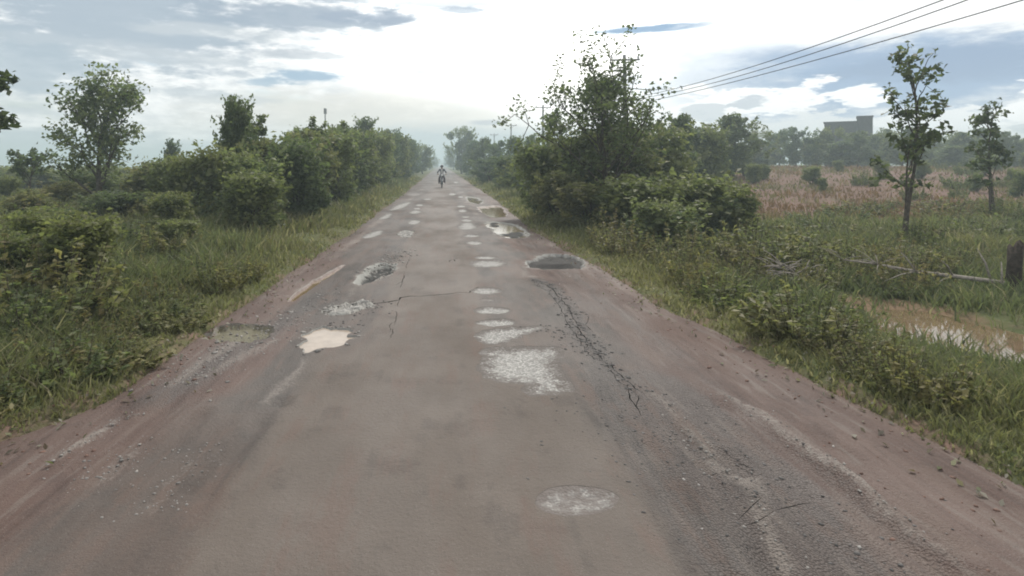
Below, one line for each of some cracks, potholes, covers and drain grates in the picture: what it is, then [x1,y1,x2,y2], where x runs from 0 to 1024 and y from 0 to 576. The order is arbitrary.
crack [373,262,478,332]
pothole [353,262,398,285]
pothole [476,205,508,217]
pothole [201,323,275,344]
pothole [322,299,374,316]
pothole [525,254,588,270]
crack [536,281,642,415]
pothole [484,221,530,238]
